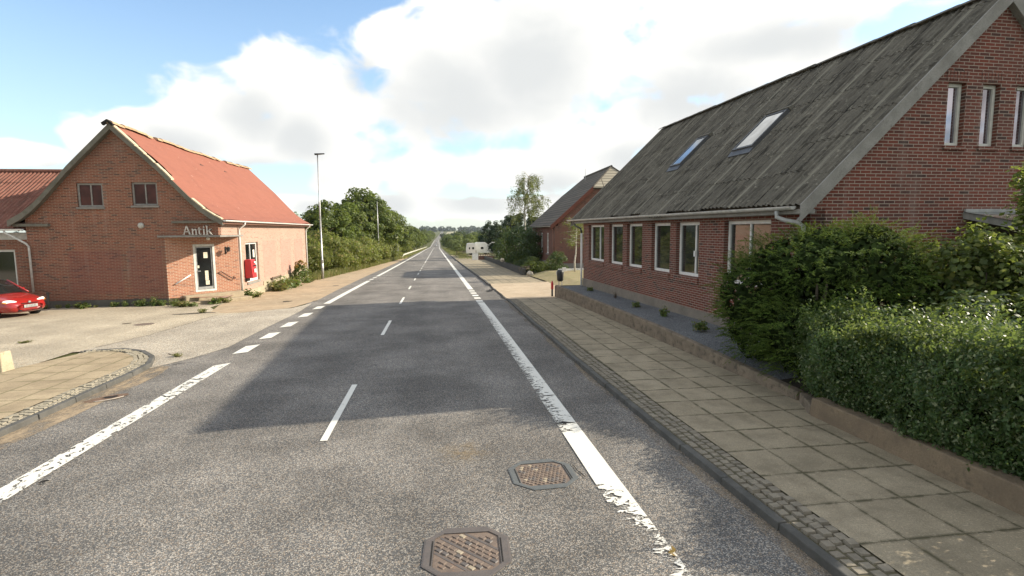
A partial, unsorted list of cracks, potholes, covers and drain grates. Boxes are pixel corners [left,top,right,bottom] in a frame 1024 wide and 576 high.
manhole cover [421,526,512,576]
drain grate [83,393,129,403]
manhole cover [508,459,579,490]
